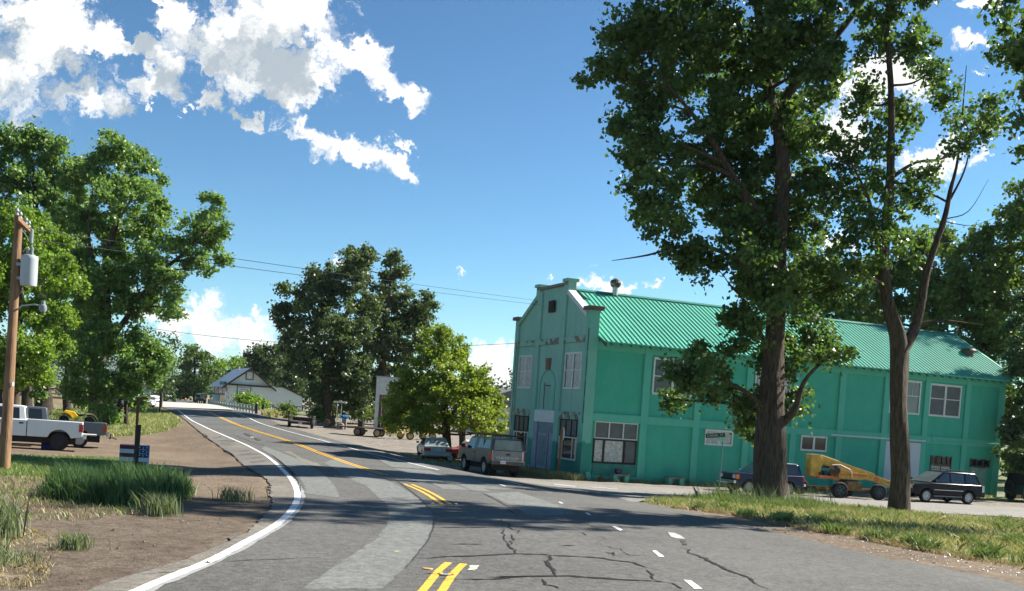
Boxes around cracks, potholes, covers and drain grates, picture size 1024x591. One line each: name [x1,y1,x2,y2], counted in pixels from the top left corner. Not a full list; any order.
crack [430,518,766,588]
